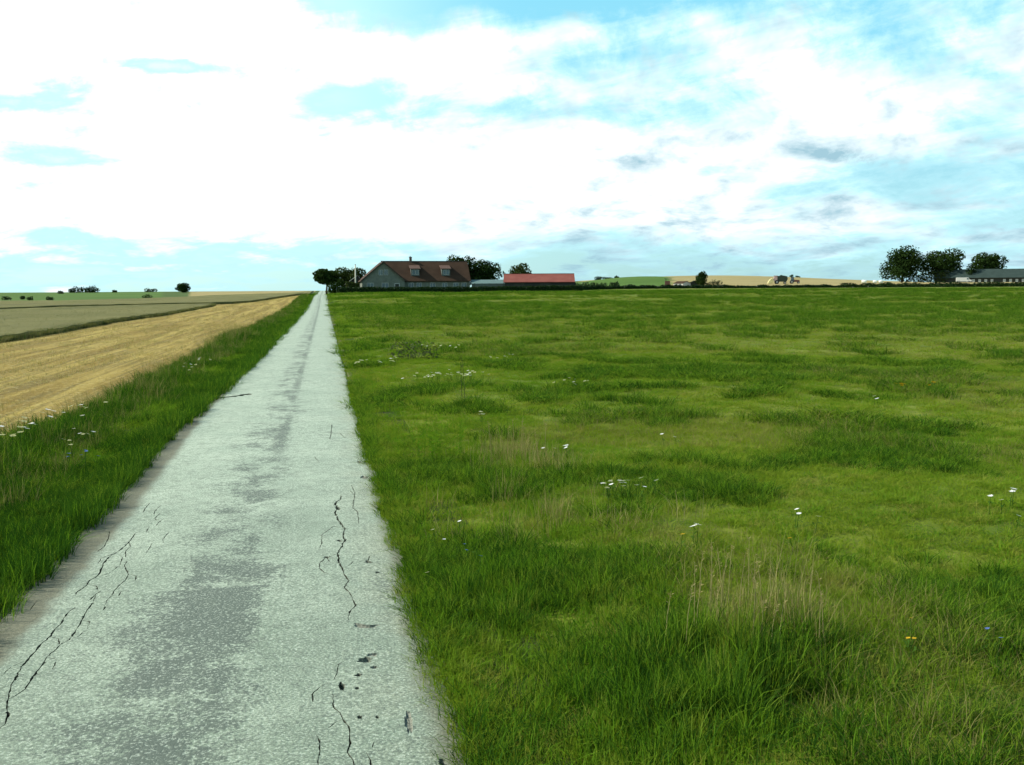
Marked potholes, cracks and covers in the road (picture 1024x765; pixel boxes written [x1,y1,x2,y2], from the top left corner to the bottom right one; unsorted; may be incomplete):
crack [311,662,374,765]
crack [319,485,384,620]
